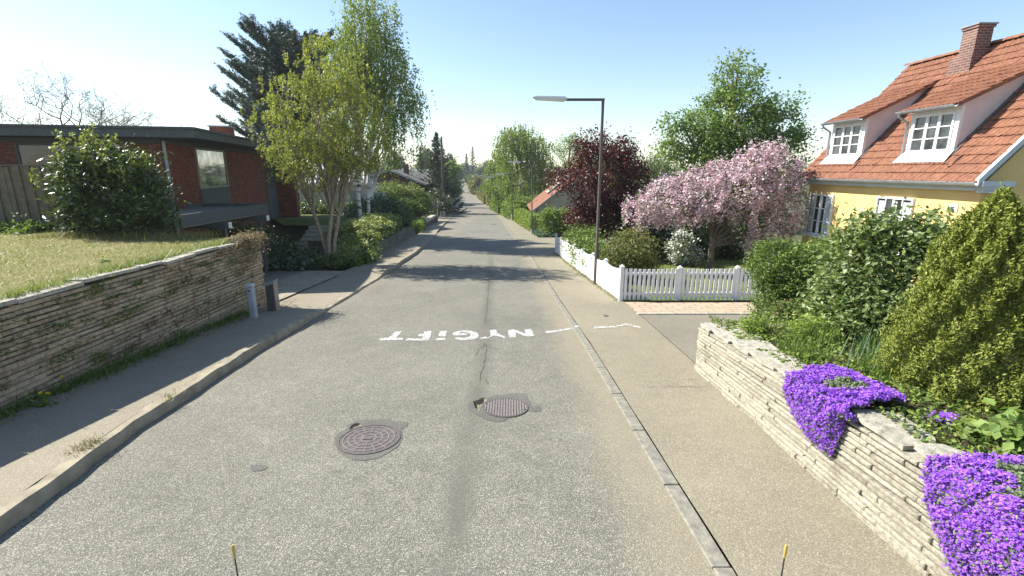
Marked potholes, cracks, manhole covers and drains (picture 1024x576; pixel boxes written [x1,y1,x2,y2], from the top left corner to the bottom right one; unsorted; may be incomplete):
manhole cover [336,424,401,455]
